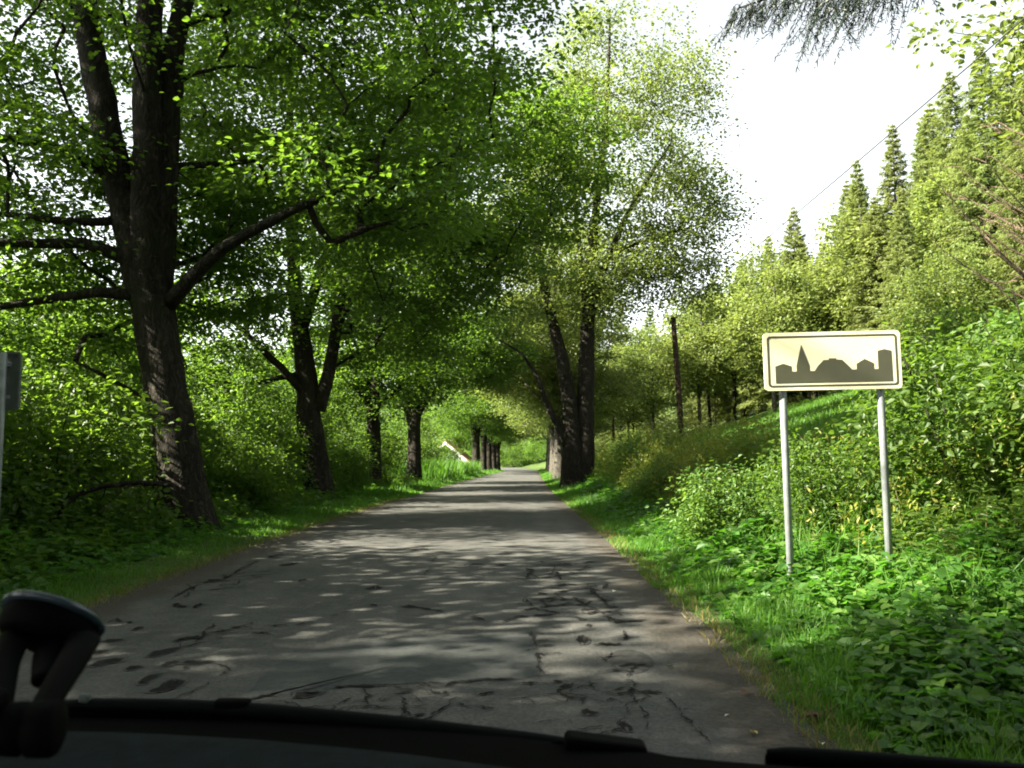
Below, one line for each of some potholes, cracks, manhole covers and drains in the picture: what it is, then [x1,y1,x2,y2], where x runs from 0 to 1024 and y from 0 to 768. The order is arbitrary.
pothole [136,672,163,685]
crack [171,552,350,677]
crack [251,557,712,747]
pothole [145,677,188,693]
